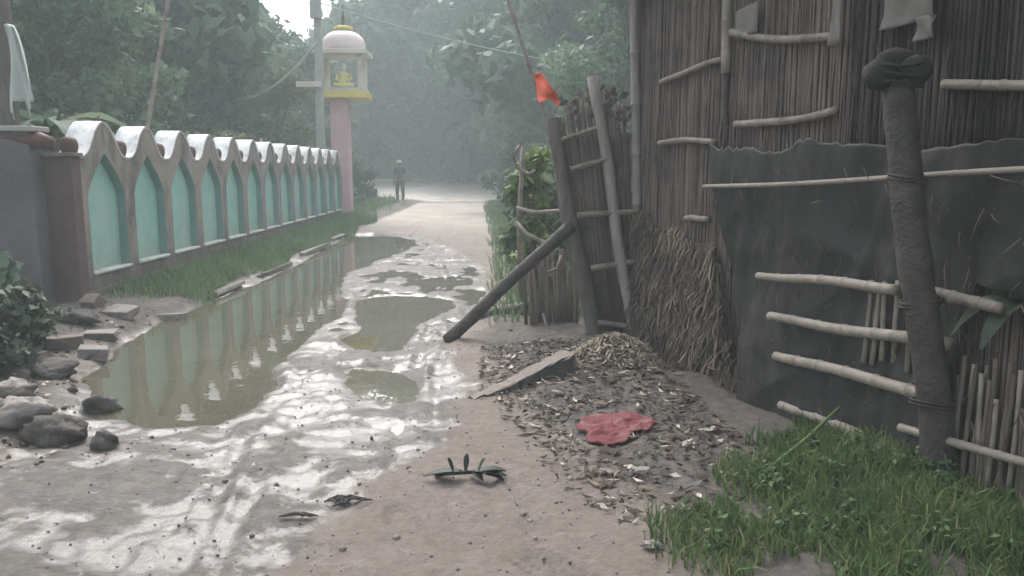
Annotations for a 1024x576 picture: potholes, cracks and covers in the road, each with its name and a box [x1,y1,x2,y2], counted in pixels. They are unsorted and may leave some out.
pothole [66,231,425,433]
pothole [325,292,469,353]
